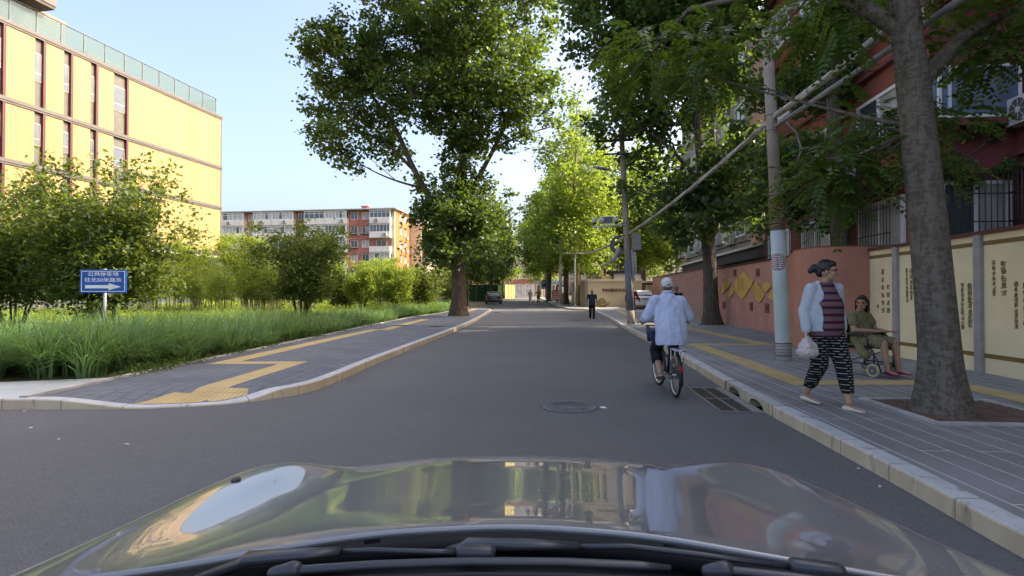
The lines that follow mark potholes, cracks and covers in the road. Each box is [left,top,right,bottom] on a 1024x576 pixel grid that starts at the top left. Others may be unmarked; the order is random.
drain grate [687,387,765,413]
manhole cover [539,401,600,413]
